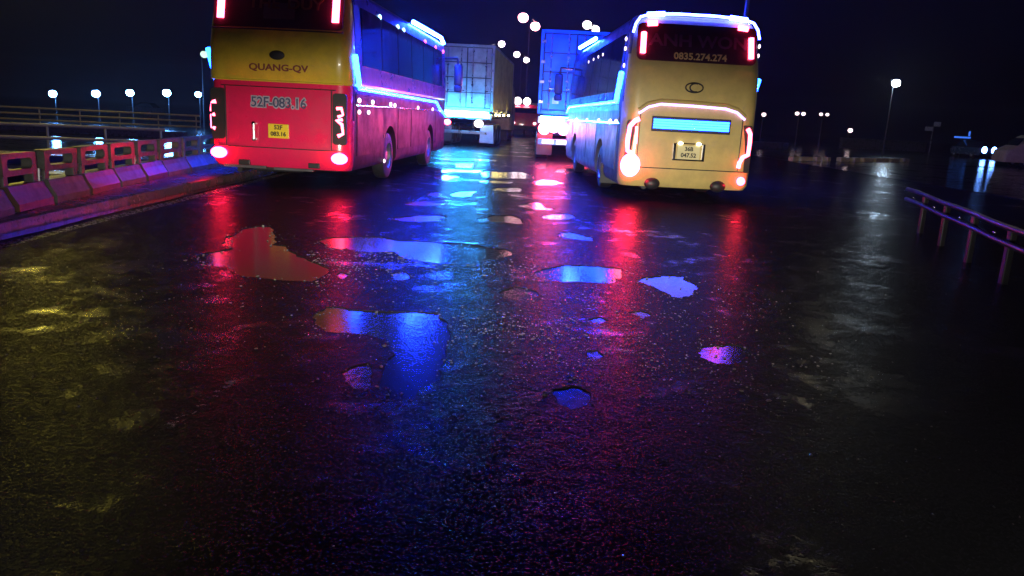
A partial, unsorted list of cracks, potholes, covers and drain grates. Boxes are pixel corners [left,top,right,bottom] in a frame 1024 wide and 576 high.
pothole [586,349,605,362]
pothole [319,237,513,264]
pothole [311,307,452,401]
pothole [477,215,524,224]
pothole [637,275,699,298]
pothole [499,286,540,301]
pothole [534,264,624,283]
pothole [697,344,752,364]
pothole [557,232,594,241]
pothole [193,226,329,281]
pothole [551,385,591,410]
